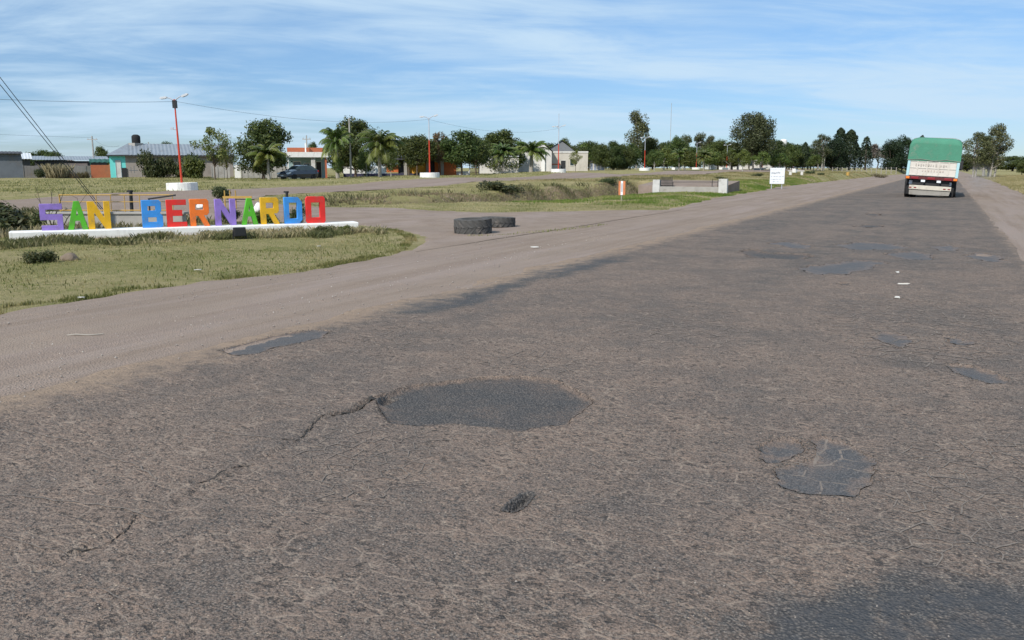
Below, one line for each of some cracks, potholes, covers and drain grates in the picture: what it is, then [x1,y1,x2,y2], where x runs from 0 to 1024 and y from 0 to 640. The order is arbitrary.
crack [193,396,466,506]
crack [0,494,152,554]
pothole [501,491,535,512]
